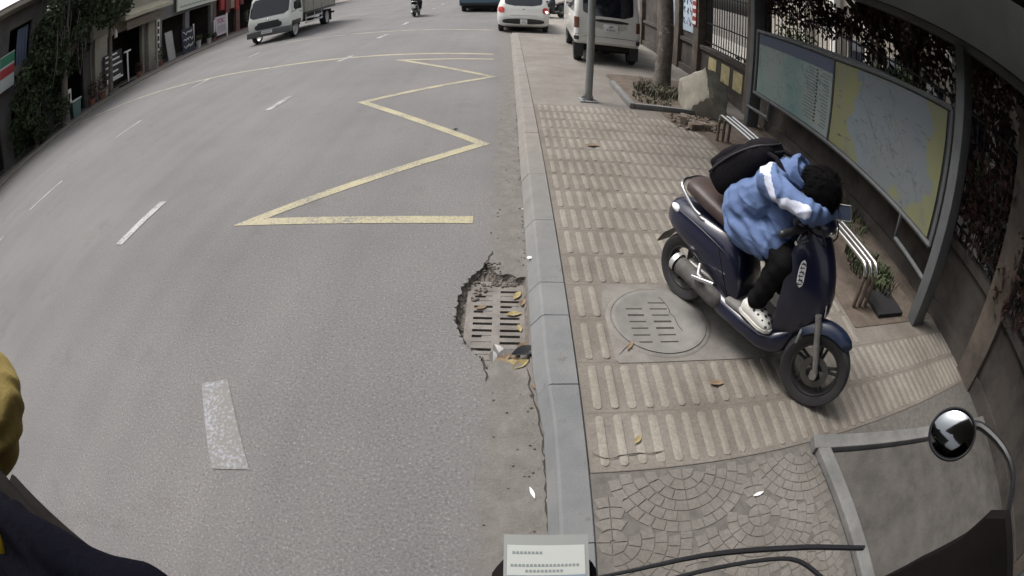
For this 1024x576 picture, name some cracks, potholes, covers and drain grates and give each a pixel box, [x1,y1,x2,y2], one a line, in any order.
manhole cover [606,288,711,358]
crack [527,369,548,532]
drain grate [463,281,526,368]
